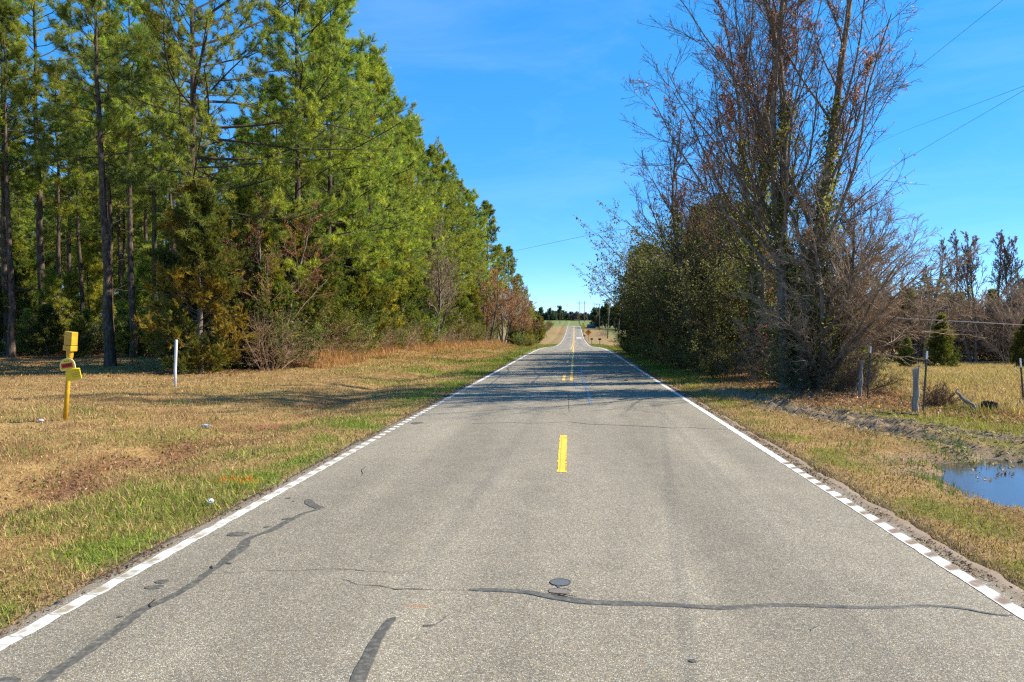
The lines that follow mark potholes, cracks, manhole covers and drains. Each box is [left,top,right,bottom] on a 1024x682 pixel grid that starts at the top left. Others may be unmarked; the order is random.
crack [472,414,707,429]
crack [181,568,435,590]
